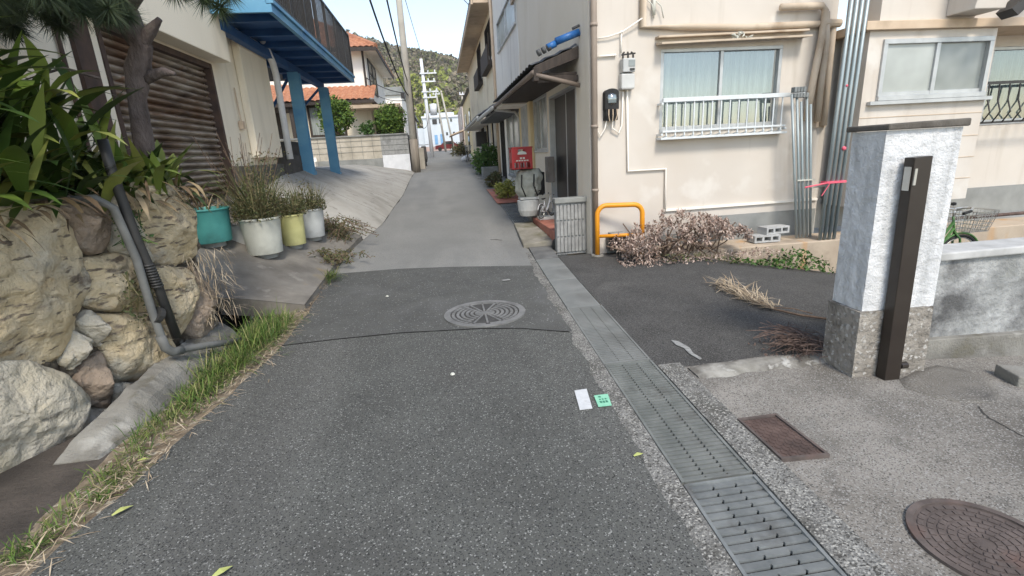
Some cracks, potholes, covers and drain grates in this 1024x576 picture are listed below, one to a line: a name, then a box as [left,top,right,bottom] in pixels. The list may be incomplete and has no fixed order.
manhole cover [905,498,1024,576]
drain grate [567,305,650,365]
drain grate [683,474,847,576]
drain grate [604,360,753,485]
manhole cover [737,413,830,462]
manhole cover [444,300,525,328]
